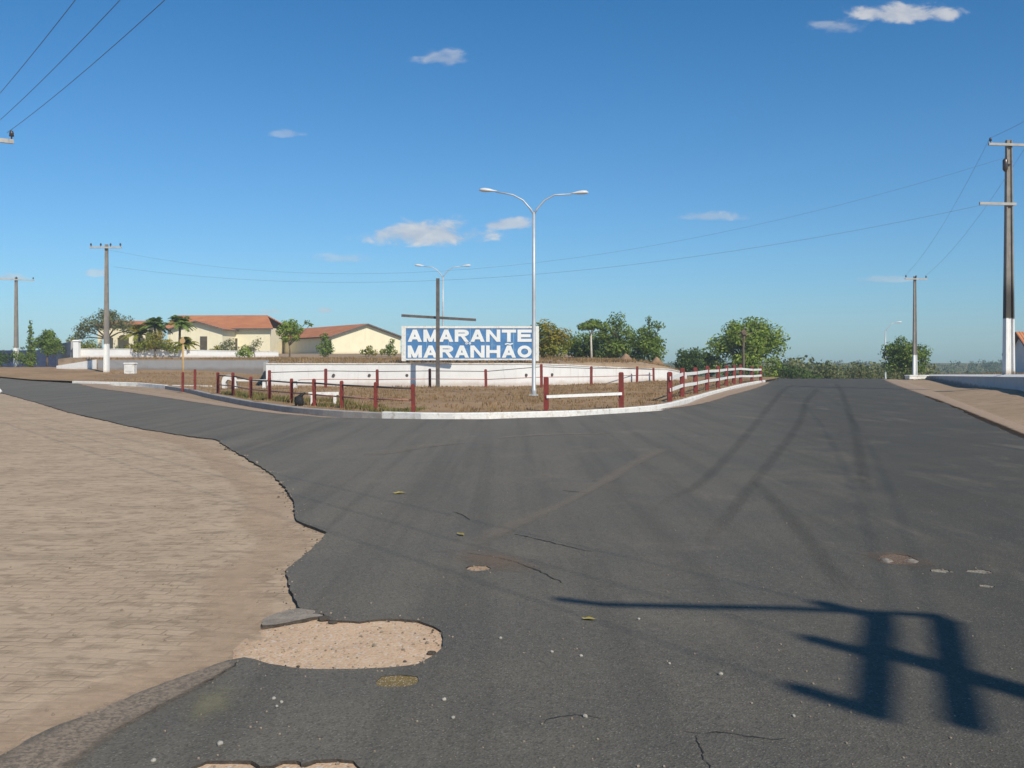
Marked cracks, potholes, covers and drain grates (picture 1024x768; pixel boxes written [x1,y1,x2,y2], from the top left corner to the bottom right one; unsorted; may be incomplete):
pothole [879,554,918,565]
pothole [233,620,443,669]
crack [687,731,782,768]
